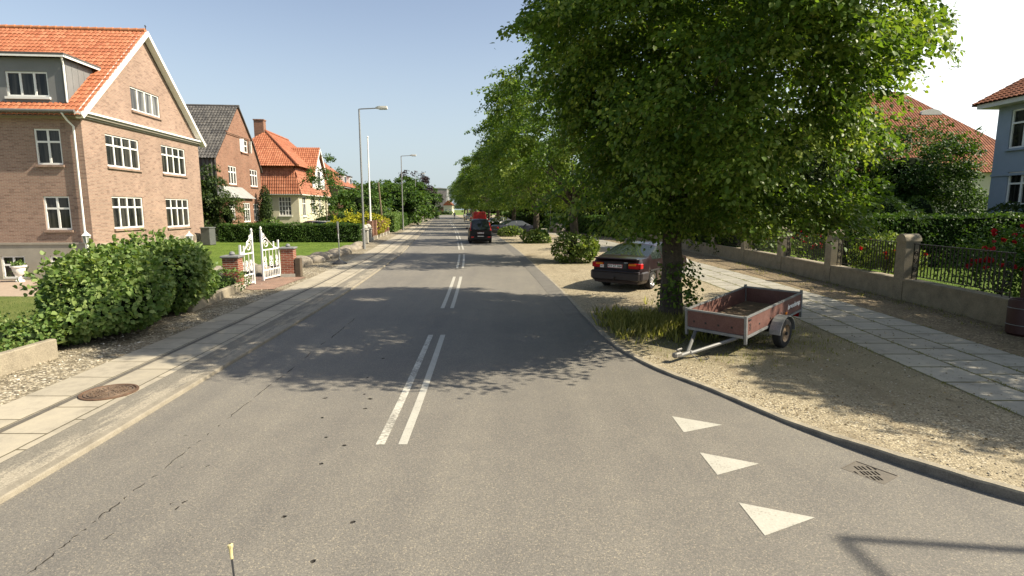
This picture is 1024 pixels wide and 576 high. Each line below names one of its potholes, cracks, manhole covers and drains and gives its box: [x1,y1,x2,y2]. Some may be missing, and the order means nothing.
crack [27,318,355,574]
drain grate [841,461,898,484]
manhole cover [77,383,139,401]
